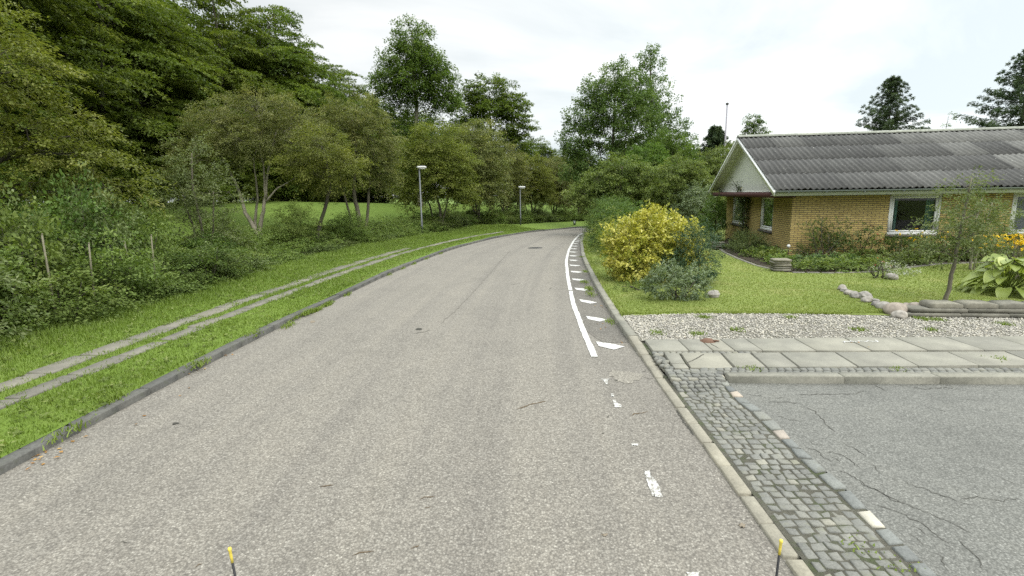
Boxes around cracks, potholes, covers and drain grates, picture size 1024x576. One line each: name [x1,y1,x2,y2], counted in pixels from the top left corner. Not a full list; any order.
crack [750,384,1018,544]
